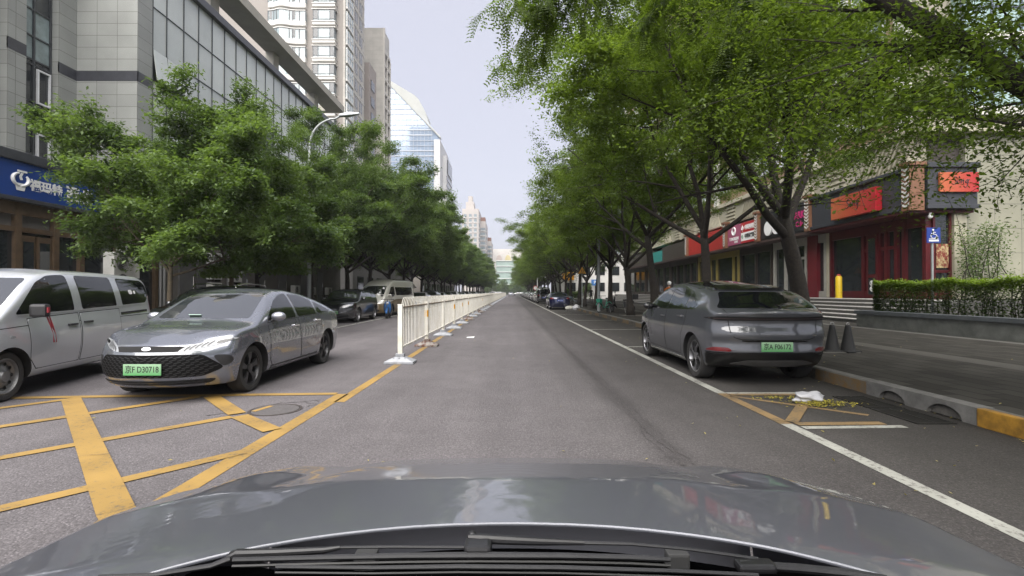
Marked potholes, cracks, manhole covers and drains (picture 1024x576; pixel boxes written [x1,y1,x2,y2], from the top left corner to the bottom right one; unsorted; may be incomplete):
drain grate [870,408,957,424]
manhole cover [247,404,303,416]
drain grate [832,396,902,408]
